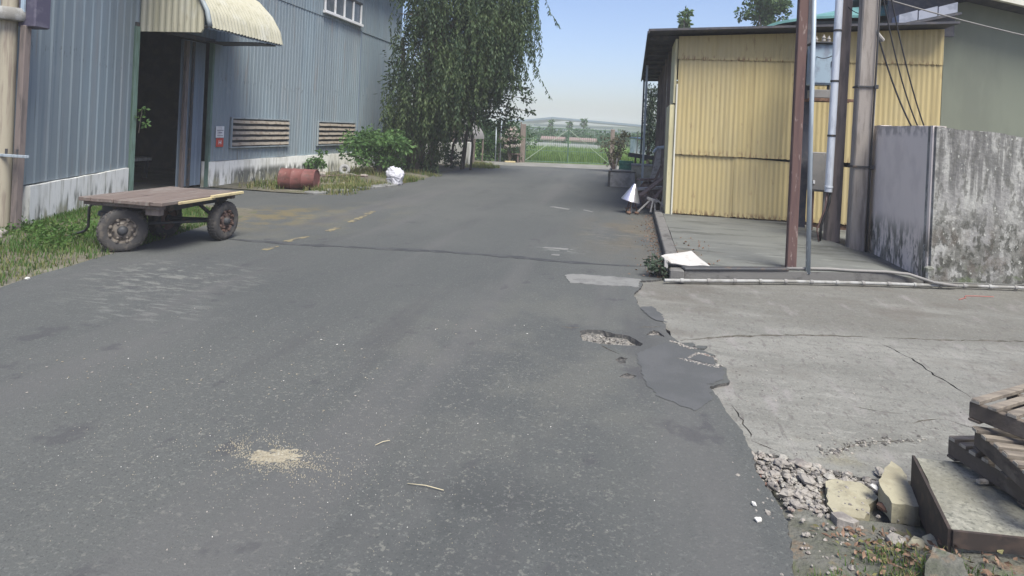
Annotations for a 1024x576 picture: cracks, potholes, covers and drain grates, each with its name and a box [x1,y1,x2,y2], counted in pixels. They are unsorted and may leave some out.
crack [732,406,784,454]
pothole [579,330,642,346]
crack [880,337,1024,397]
